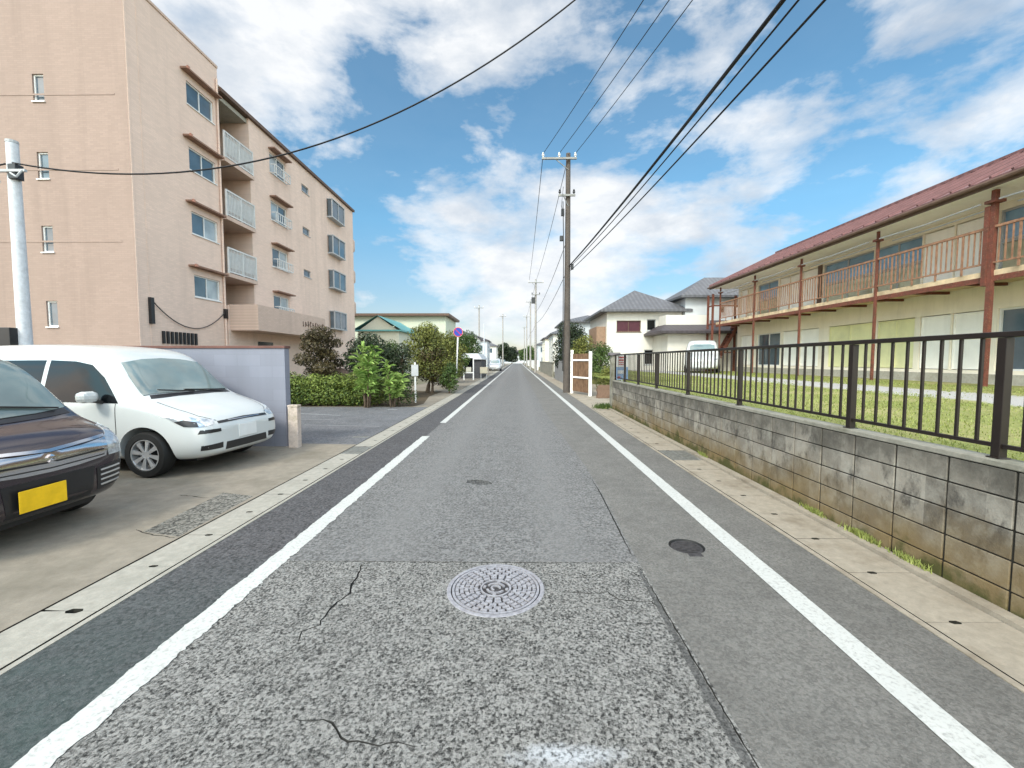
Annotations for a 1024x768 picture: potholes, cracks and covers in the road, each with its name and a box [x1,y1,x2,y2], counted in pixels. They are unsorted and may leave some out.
manhole cover [447,564,544,618]
manhole cover [668,539,705,557]
crack [293,718,417,747]
crack [297,564,362,643]
